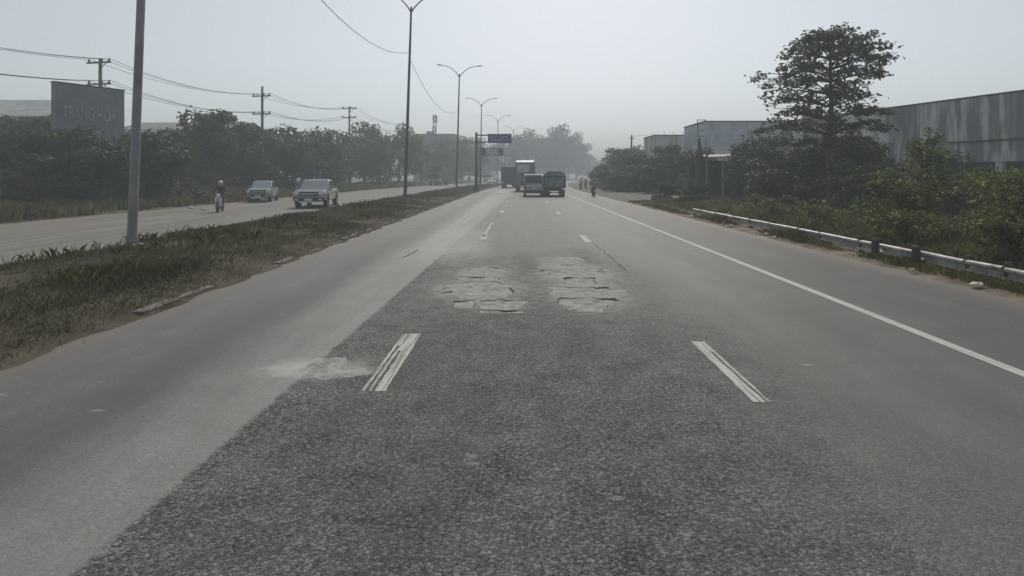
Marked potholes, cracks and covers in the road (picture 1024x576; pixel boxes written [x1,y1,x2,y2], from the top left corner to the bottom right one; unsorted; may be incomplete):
pothole [467,267,508,276]
pothole [441,281,515,300]
pothole [452,300,475,308]
pothole [477,299,529,309]
pothole [557,297,619,313]
pothole [540,268,607,276]
pothole [563,277,597,285]
pothole [547,287,629,296]
